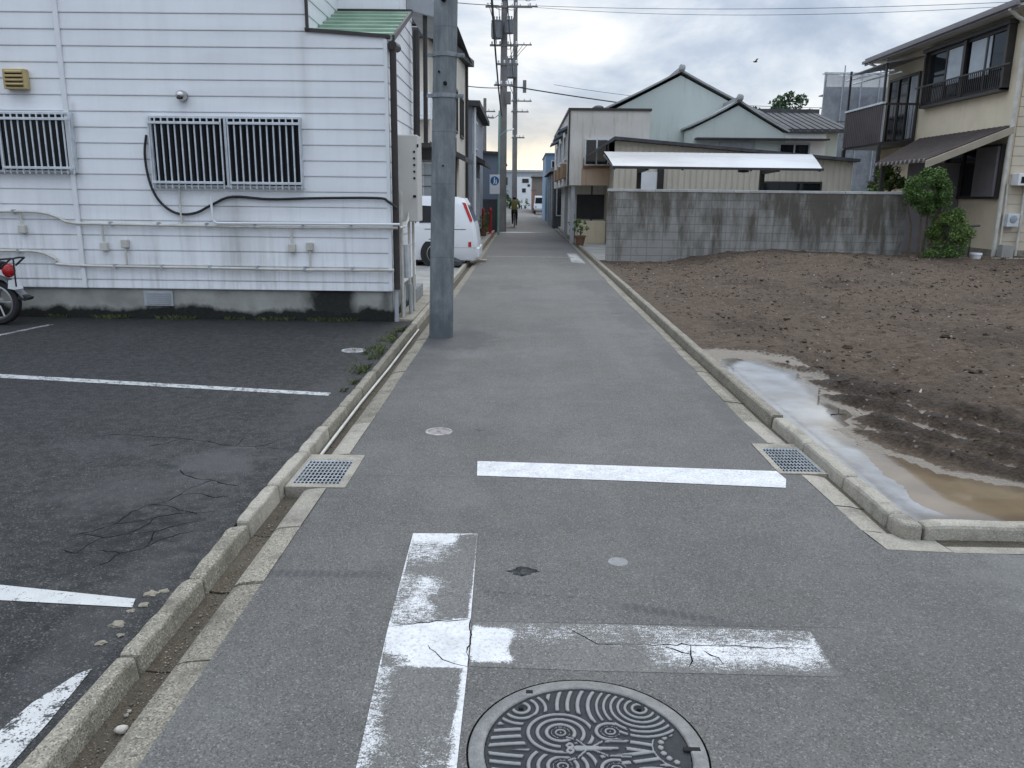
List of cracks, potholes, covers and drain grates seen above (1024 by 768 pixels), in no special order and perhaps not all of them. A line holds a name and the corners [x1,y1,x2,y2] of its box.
drain grate [751,443,828,484]
crack [575,632,774,666]
crack [65,470,237,567]
manhole cover [425,427,453,436]
crack [428,620,472,667]
pothole [506,566,540,577]
manhole cover [468,681,709,768]
crack [110,434,285,449]
drain grate [285,454,365,497]
